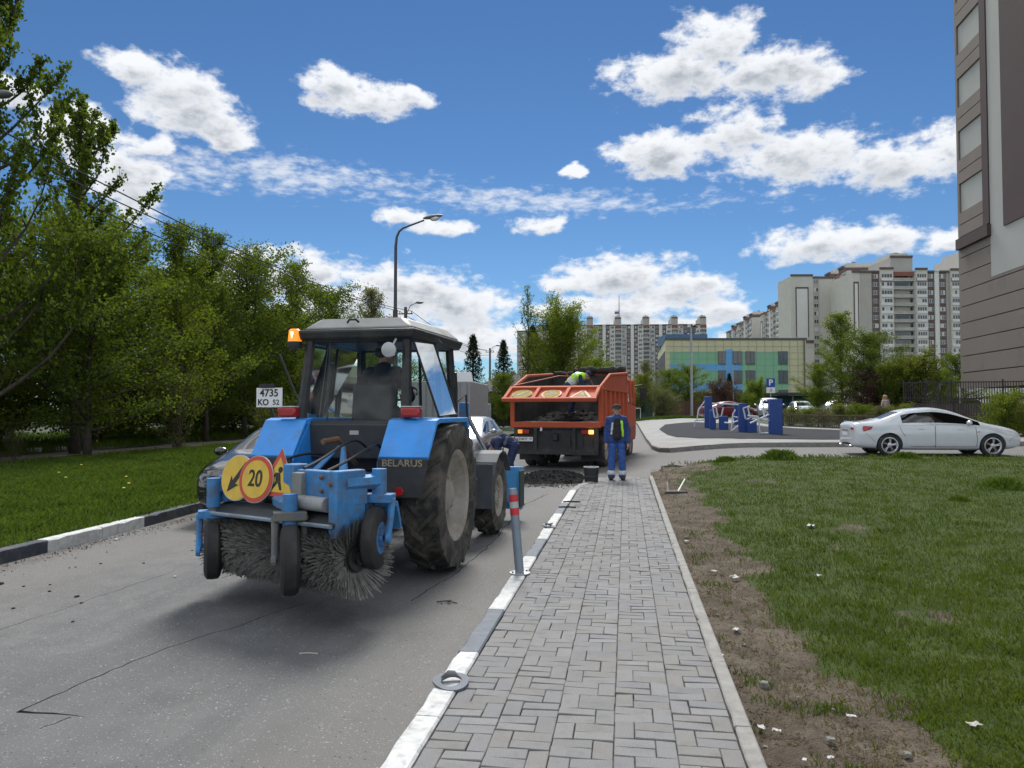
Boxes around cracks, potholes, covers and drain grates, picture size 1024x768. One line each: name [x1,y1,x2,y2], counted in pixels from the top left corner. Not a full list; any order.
crack [19,603,305,729]
crack [411,494,548,601]
